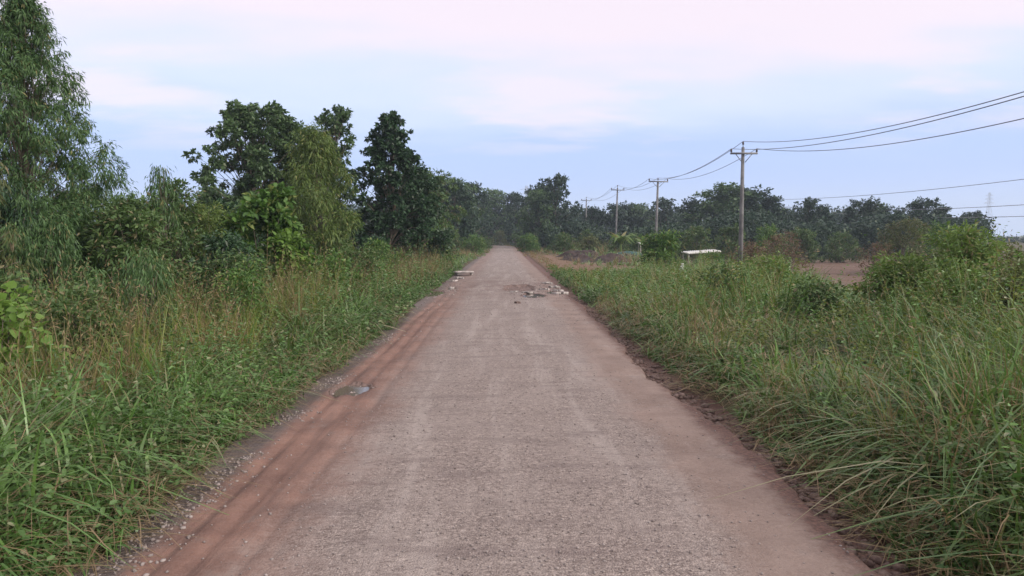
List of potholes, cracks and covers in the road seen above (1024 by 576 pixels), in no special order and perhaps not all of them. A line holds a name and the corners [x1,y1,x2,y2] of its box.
pothole [502,284,536,292]
pothole [328,381,375,398]
